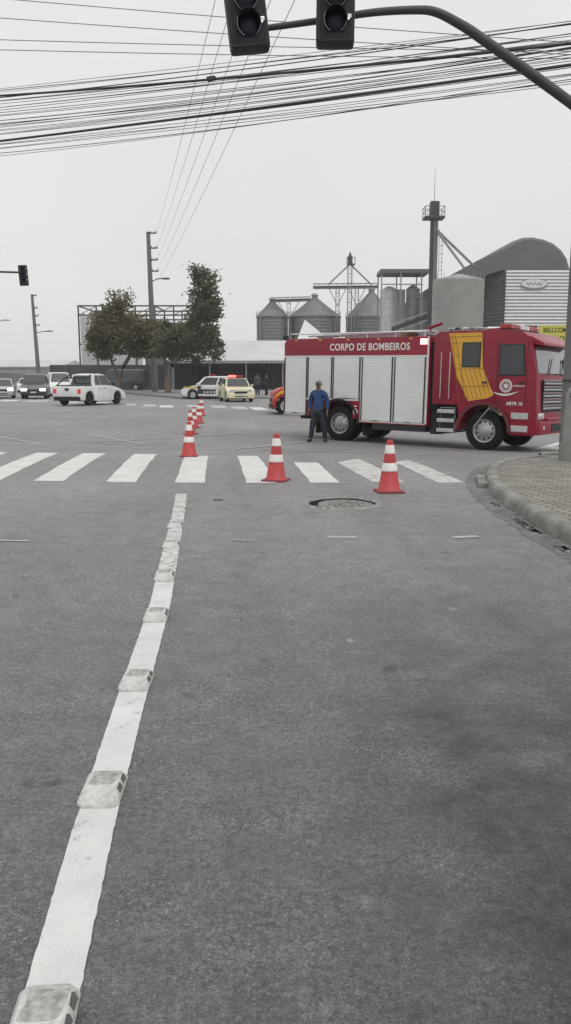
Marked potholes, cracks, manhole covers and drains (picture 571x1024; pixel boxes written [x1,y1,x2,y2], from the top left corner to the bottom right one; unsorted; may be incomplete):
manhole cover [301,497,384,510]
